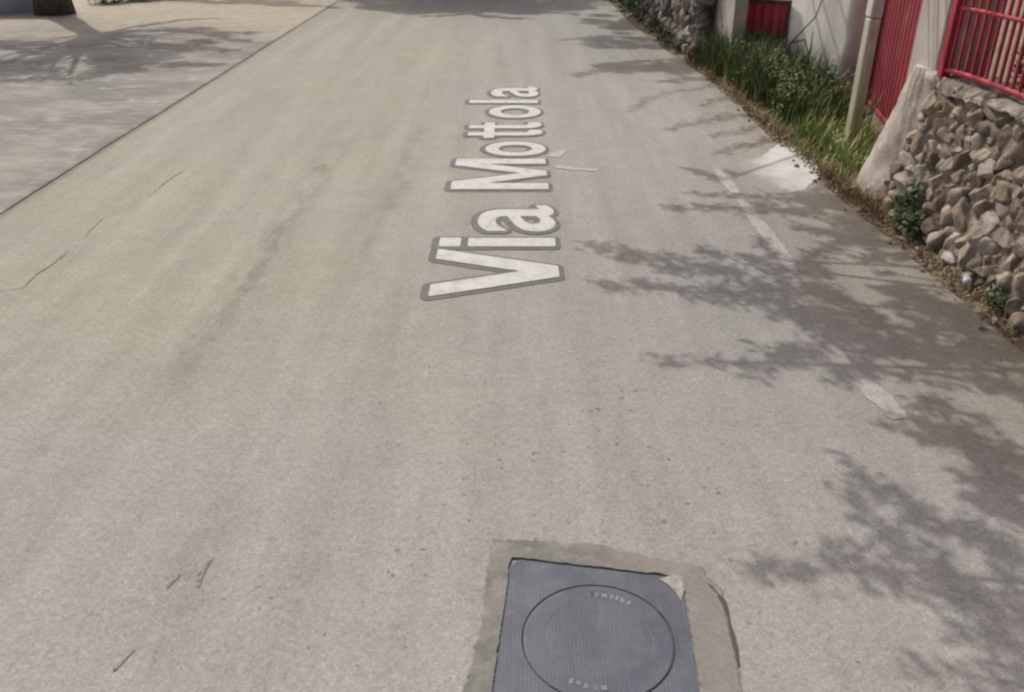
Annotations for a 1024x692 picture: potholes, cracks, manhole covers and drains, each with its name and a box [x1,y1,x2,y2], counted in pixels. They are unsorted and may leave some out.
crack [1,250,68,291]
crack [166,557,213,588]
manhole cover [462,539,744,692]
crack [112,649,136,671]
